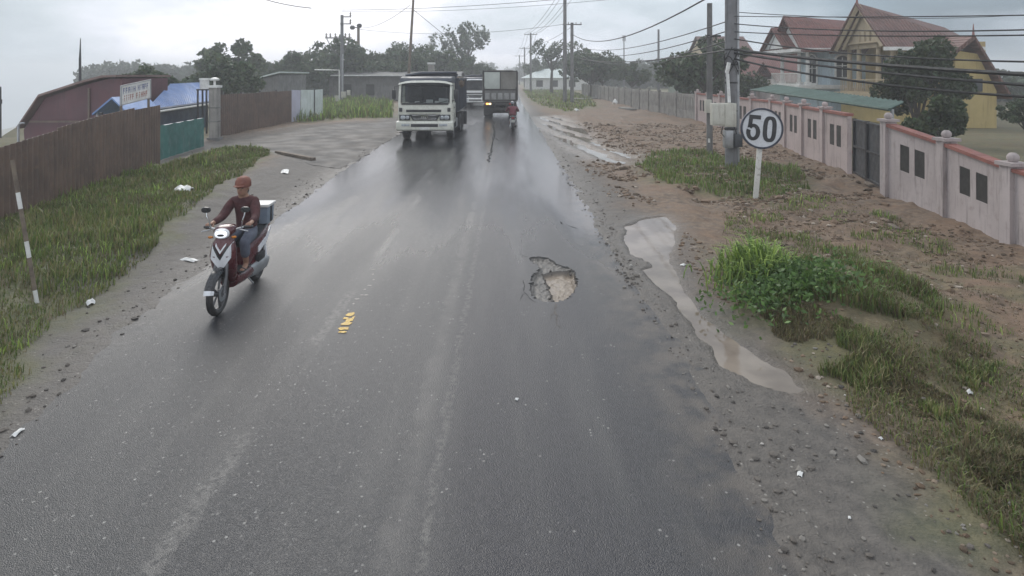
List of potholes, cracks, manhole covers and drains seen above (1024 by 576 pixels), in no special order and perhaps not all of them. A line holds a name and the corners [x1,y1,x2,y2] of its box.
pothole [528,256,579,302]
